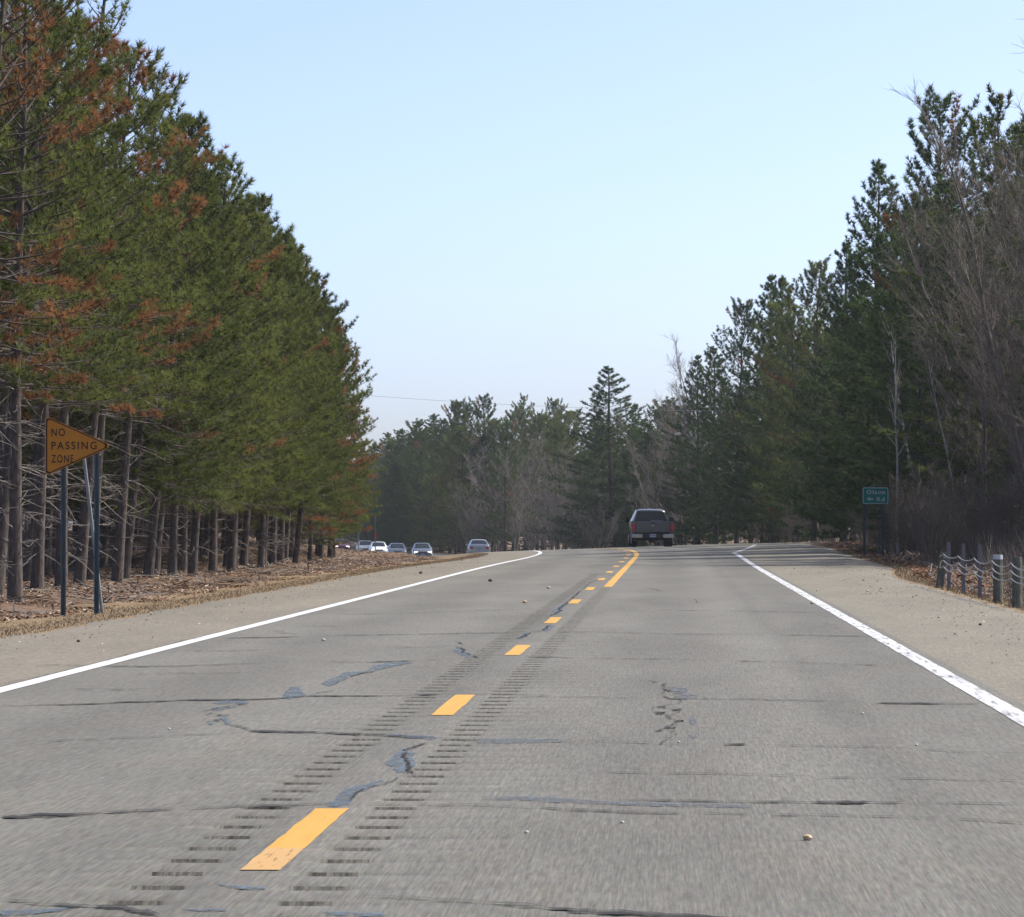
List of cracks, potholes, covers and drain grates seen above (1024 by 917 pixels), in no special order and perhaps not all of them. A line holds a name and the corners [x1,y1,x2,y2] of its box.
crack [3,660,972,774]
